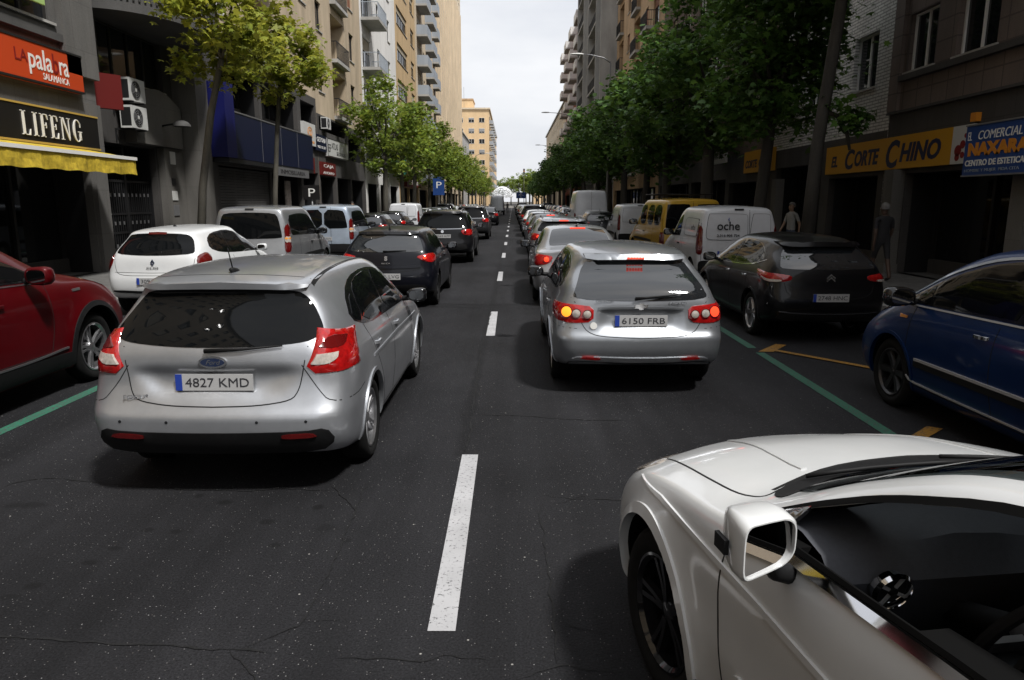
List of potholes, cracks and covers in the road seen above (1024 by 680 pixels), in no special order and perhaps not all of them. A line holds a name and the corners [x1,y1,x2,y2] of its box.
crack [0,481,369,680]
crack [341,654,489,662]
crack [519,494,628,679]
crack [2,478,331,491]
